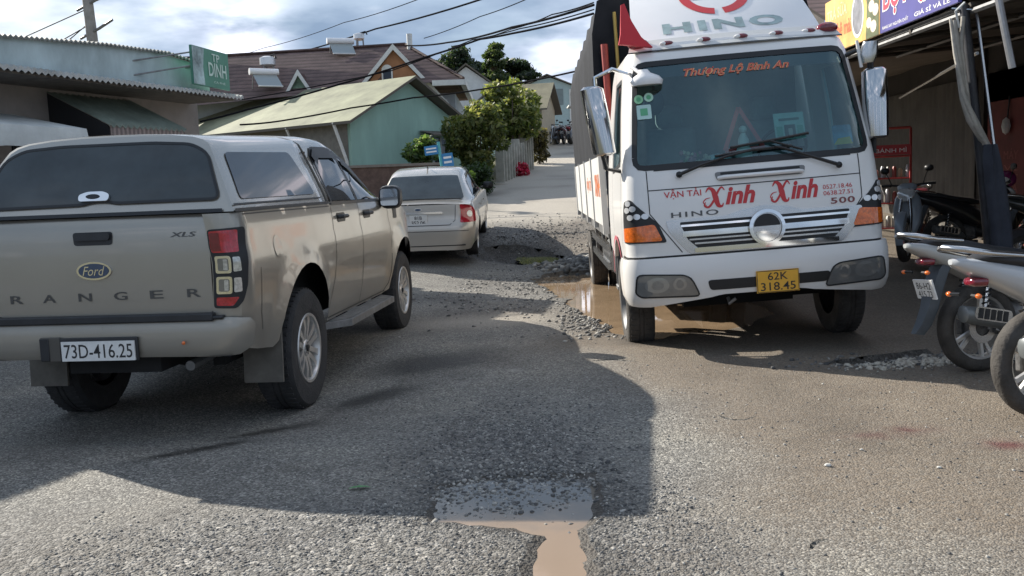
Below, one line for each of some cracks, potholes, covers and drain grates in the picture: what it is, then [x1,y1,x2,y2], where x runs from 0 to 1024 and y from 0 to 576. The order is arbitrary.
pothole [530,269,769,343]
pothole [476,244,566,265]
pothole [425,472,604,576]
pothole [824,348,934,364]
